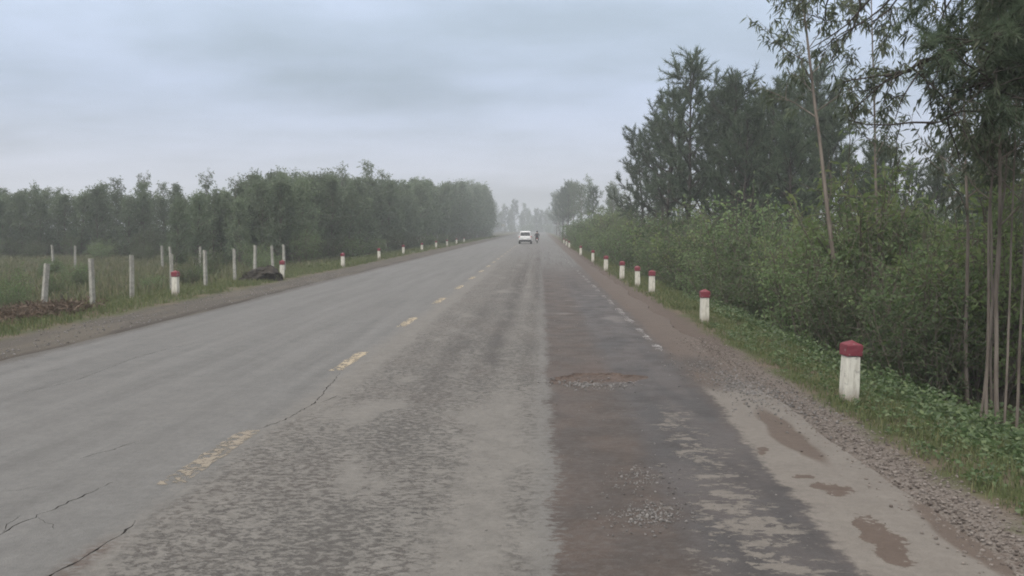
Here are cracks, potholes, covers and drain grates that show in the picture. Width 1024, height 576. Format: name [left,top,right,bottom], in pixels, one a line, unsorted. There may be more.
pothole [537,372,649,393]
crack [49,522,135,576]
crack [0,482,112,535]
